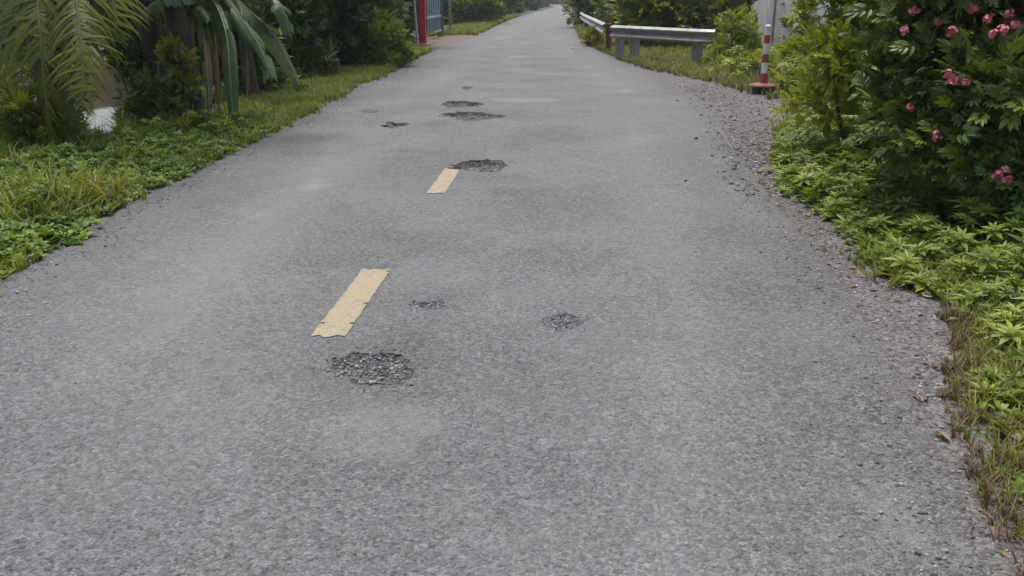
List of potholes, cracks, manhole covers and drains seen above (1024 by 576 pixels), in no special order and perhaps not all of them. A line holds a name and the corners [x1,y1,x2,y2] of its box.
pothole [438,111,506,122]
pothole [444,158,519,172]
pothole [312,346,434,392]
pothole [408,299,450,309]
pothole [535,310,595,334]
